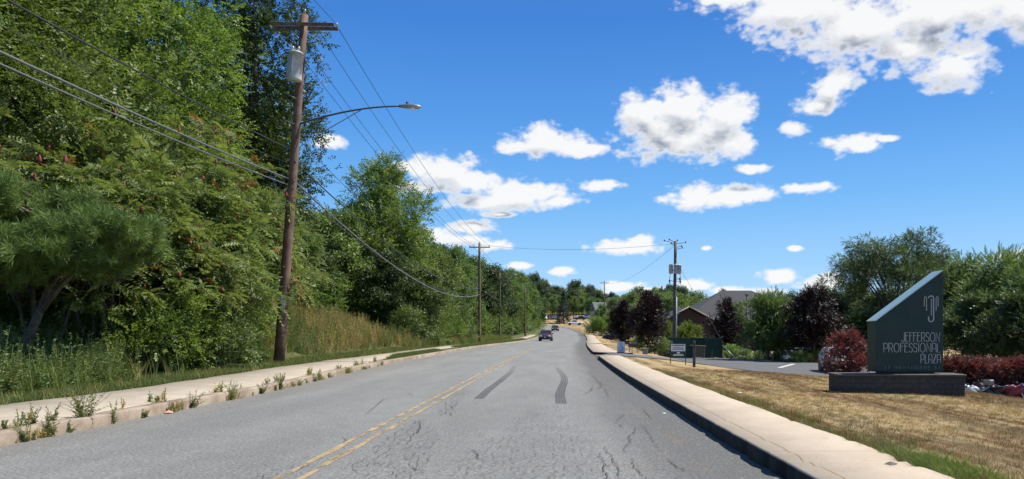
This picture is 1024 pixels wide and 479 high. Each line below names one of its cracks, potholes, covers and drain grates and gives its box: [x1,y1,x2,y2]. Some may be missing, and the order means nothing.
crack [439,408,687,479]
